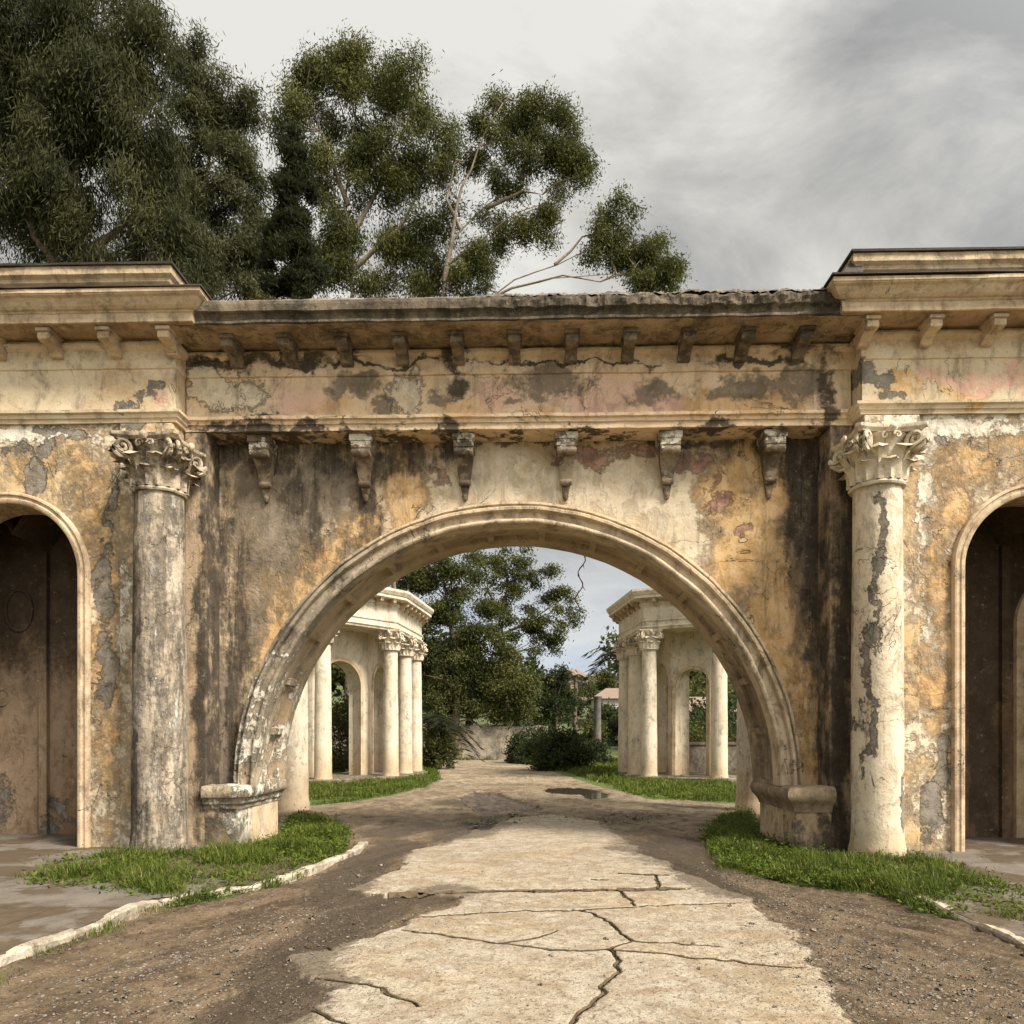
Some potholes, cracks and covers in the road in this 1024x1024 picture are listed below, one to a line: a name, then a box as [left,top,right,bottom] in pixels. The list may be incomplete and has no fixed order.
pothole [469,819,496,831]
crack [312,873,804,1024]
pothole [458,792,540,813]
pothole [543,787,608,800]
